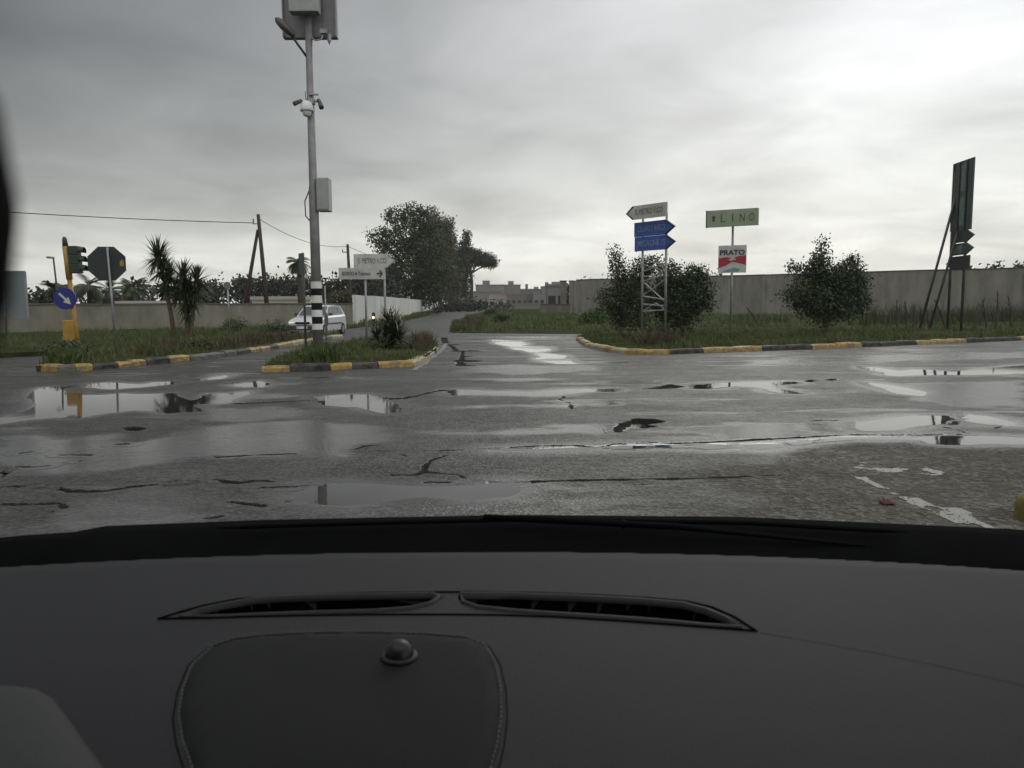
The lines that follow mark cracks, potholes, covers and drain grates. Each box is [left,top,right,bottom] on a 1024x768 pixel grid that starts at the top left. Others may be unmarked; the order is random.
crack [435,336,485,366]
crack [550,394,583,410]
crack [0,441,489,523]
pothole [602,416,678,435]
crack [195,380,451,405]
